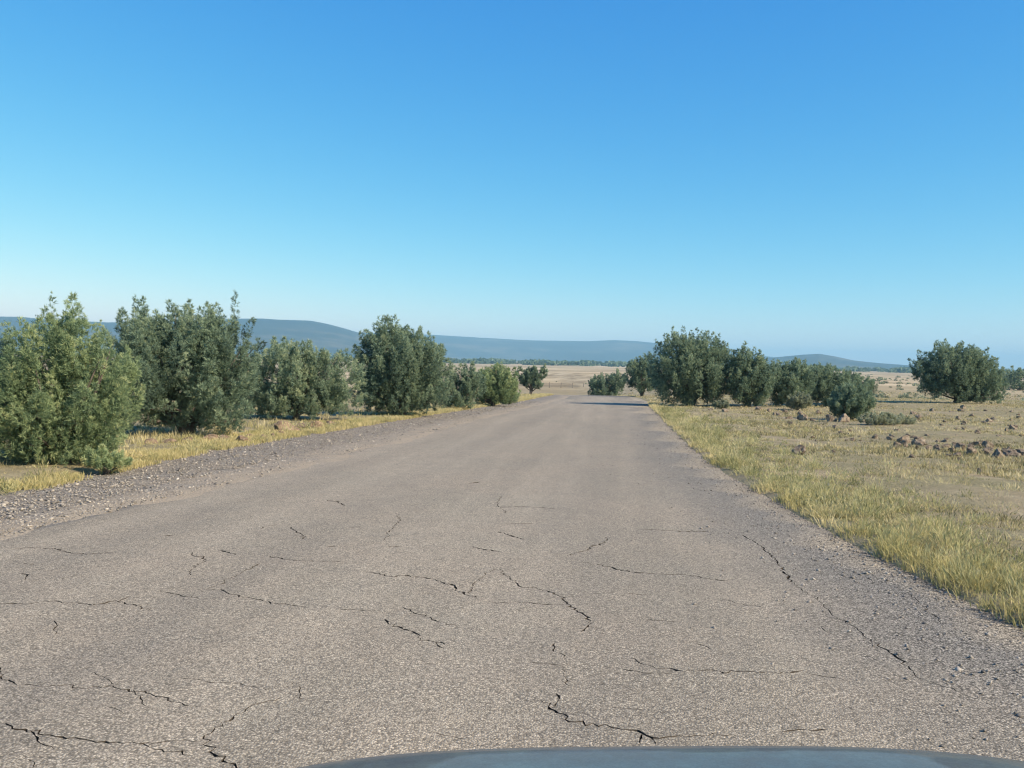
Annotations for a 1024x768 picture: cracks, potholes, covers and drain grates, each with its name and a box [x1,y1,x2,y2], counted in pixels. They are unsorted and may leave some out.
crack [370,569,591,632]
crack [744,536,956,691]
crack [532,643,730,744]
crack [1,546,341,611]
crack [382,607,459,648]
crack [624,658,840,679]
crack [475,496,555,552]
crack [0,667,302,768]
crack [567,537,724,581]
